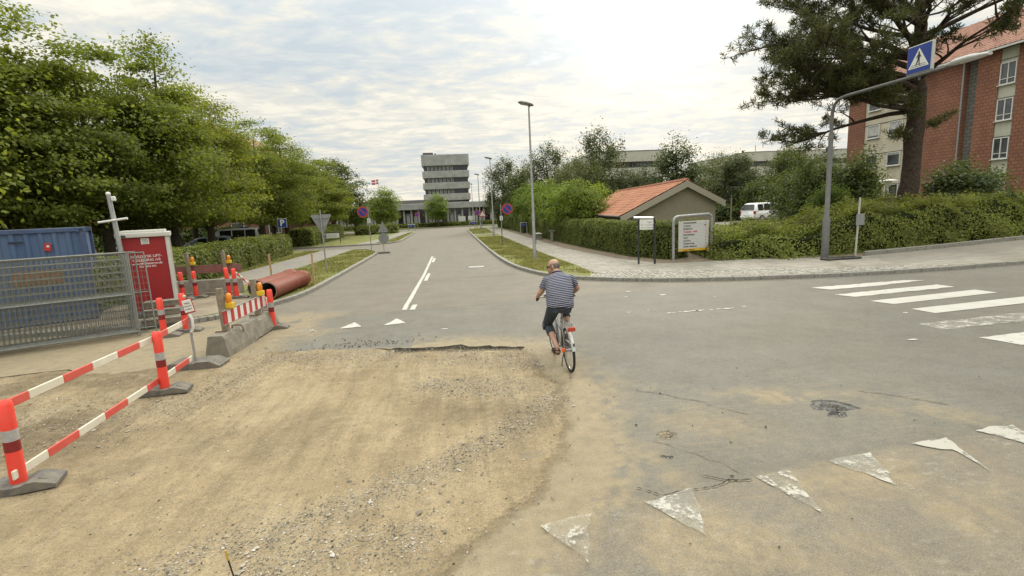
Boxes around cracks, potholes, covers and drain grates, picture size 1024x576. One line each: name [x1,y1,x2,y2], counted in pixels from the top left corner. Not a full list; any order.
crack [637,441,751,496]
pothole [656,431,678,440]
pothole [810,400,860,418]
